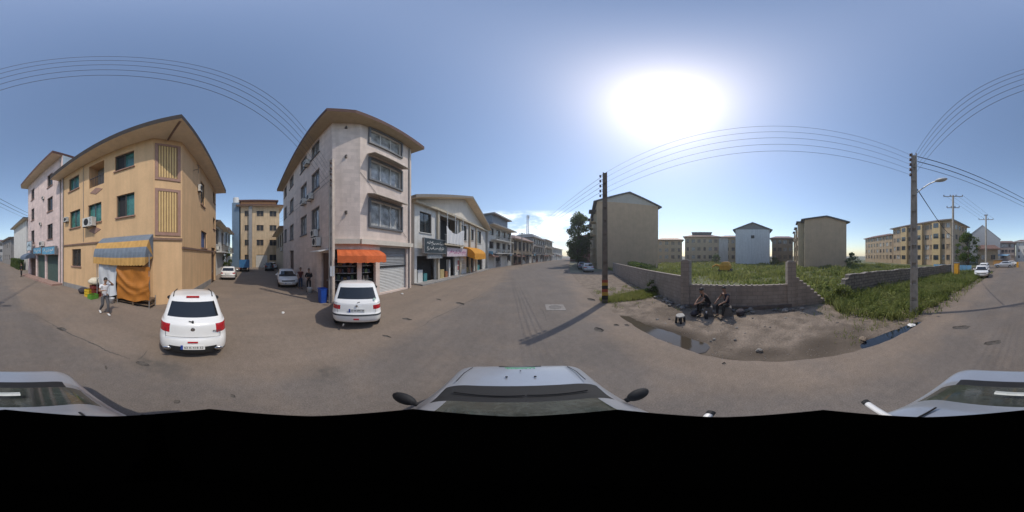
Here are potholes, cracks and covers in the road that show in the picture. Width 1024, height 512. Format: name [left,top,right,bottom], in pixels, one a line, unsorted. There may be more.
crack [35,315,129,359]
